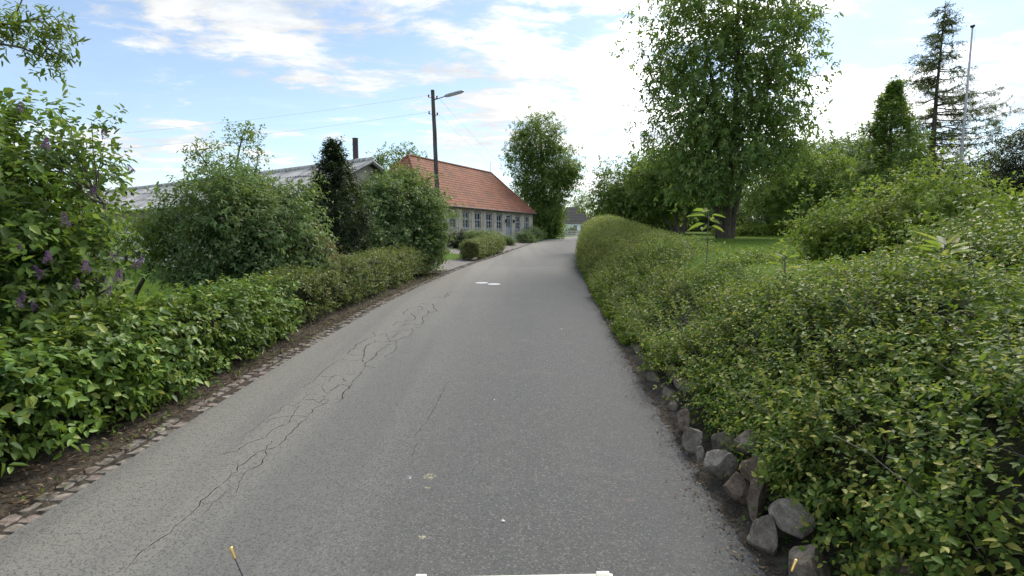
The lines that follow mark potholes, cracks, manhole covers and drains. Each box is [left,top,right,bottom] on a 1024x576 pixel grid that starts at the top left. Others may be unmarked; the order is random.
crack [128,292,450,567]
